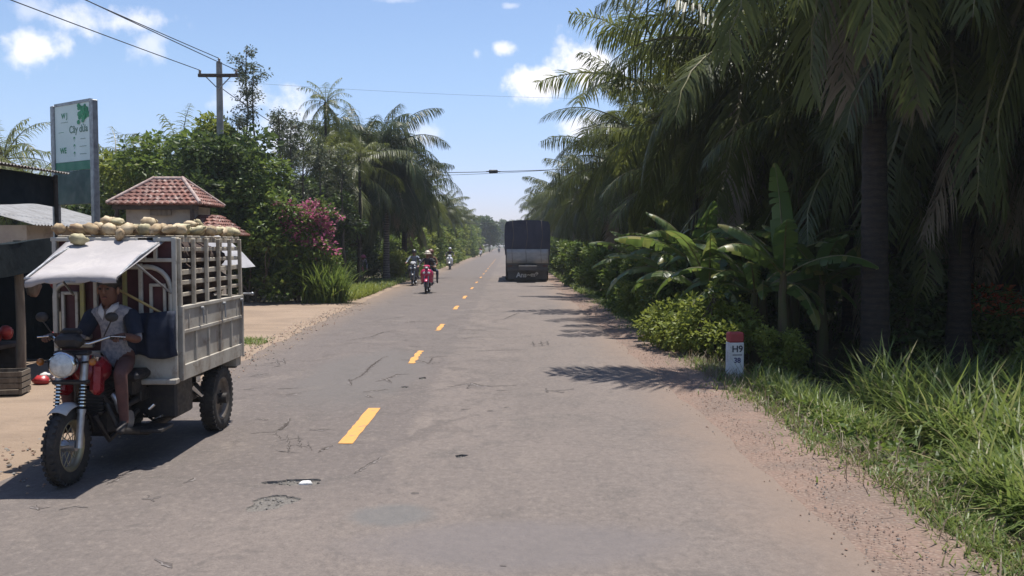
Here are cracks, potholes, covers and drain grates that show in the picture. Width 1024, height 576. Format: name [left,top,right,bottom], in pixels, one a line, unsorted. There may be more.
crack [256,418,334,452]
crack [155,558,173,568]
crack [450,383,510,411]
pothole [246,495,302,512]
crack [348,356,398,397]
